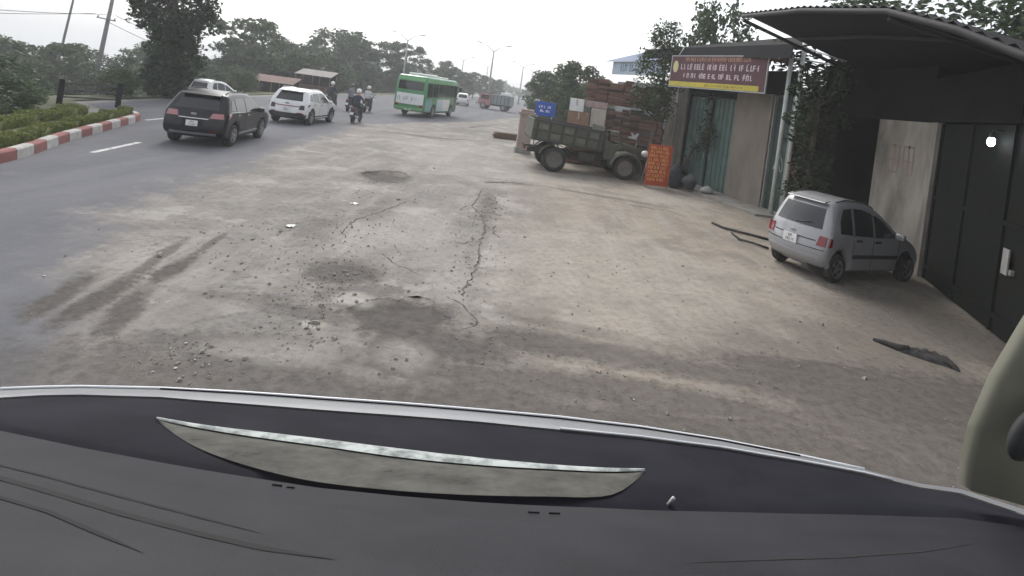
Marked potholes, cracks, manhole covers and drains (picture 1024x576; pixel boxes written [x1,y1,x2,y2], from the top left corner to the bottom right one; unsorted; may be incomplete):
pothole [360,170,411,183]
crack [340,202,405,238]
crack [447,182,515,330]
